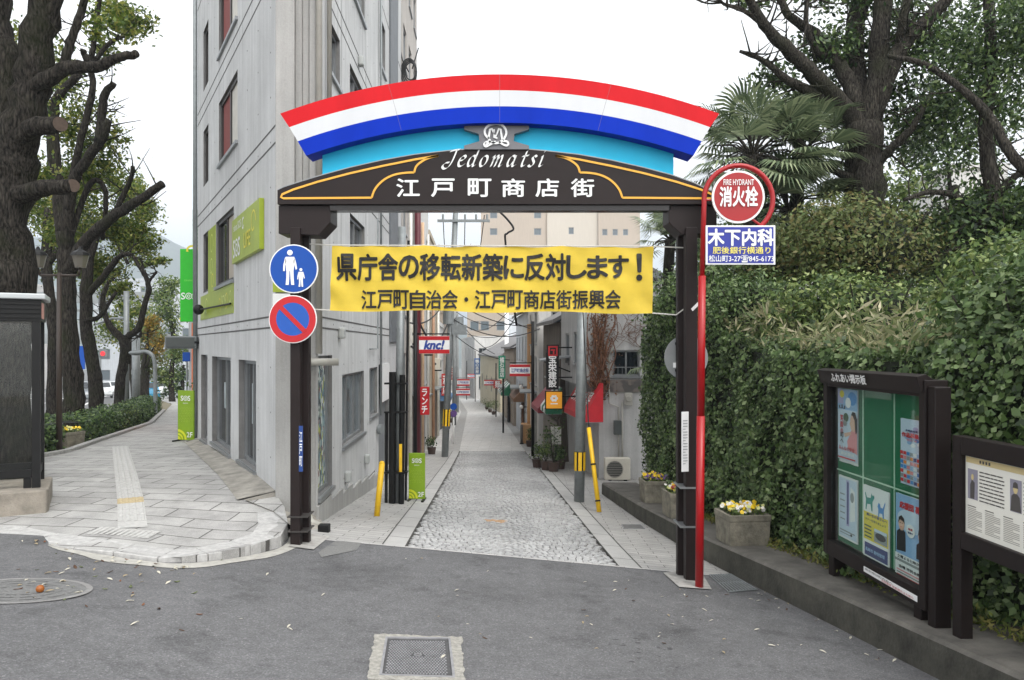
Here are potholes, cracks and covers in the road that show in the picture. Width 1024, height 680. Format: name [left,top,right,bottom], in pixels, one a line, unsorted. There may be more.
drain grate [709,574,757,593]
manhole cover [367,633,466,680]
manhole cover [0,578,93,604]
